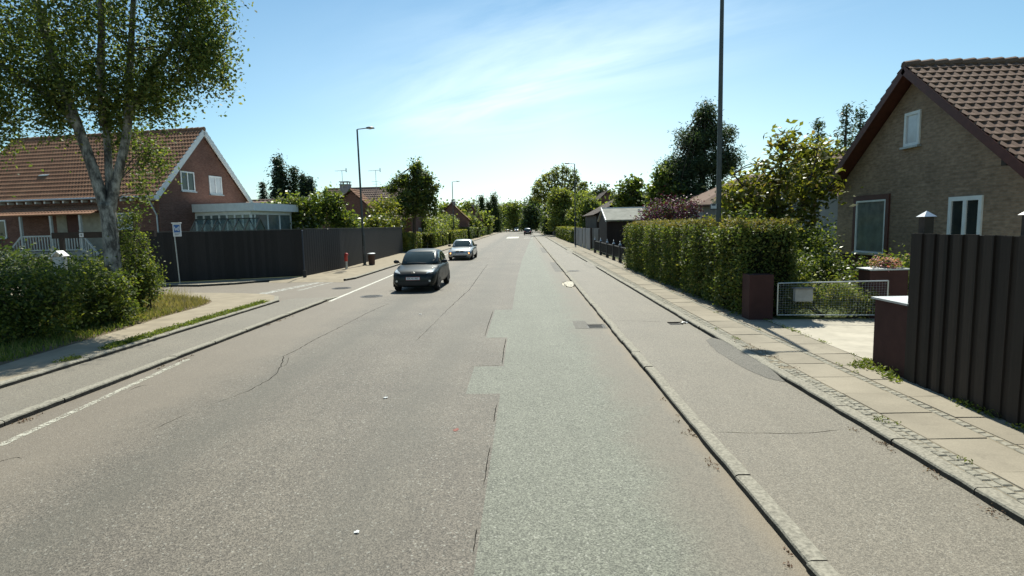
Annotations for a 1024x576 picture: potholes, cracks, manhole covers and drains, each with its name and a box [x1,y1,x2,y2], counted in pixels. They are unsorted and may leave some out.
crack [157,305,385,428]
